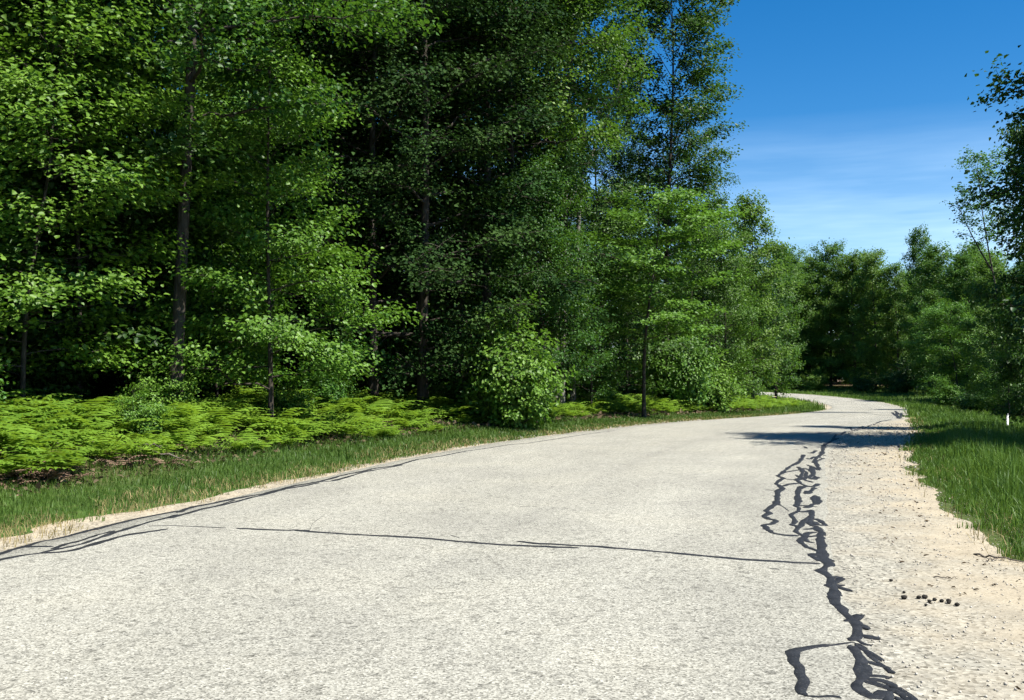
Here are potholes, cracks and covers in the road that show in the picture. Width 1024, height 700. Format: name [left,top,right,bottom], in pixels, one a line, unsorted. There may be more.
crack [865,411,905,419]
